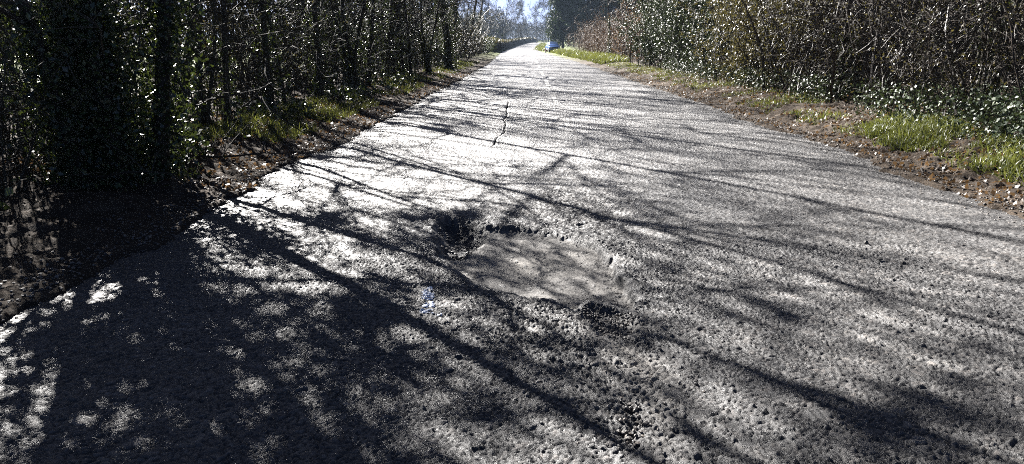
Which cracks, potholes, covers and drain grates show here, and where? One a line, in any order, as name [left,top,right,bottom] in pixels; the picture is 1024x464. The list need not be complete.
pothole [566,301,660,346]
crack [491,102,511,146]
pothole [421,213,648,317]
